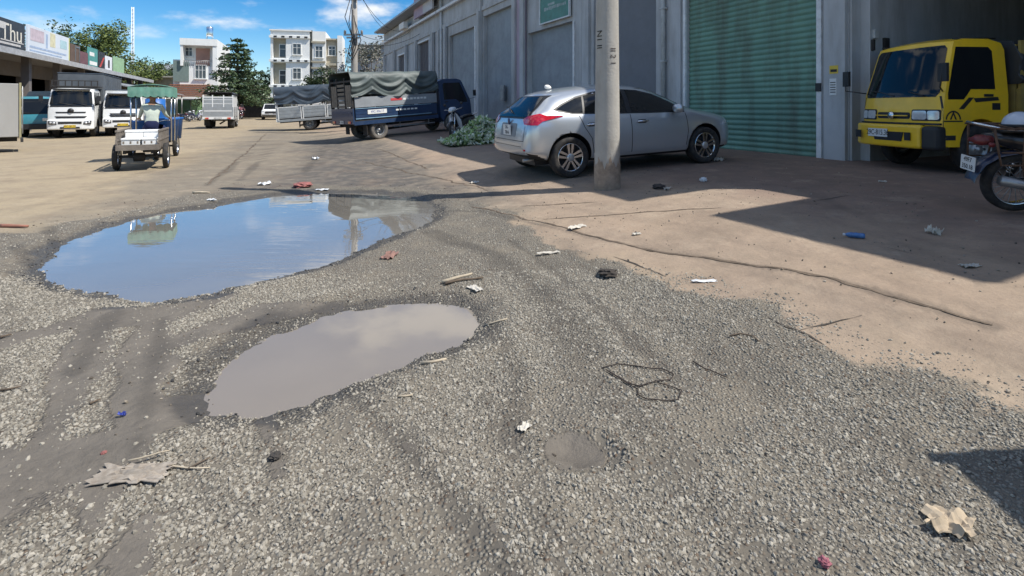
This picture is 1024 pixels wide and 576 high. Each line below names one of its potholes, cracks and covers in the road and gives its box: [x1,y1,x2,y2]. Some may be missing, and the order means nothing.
pothole [18,191,443,305]
crack [362,149,993,349]
pothole [182,296,488,427]
